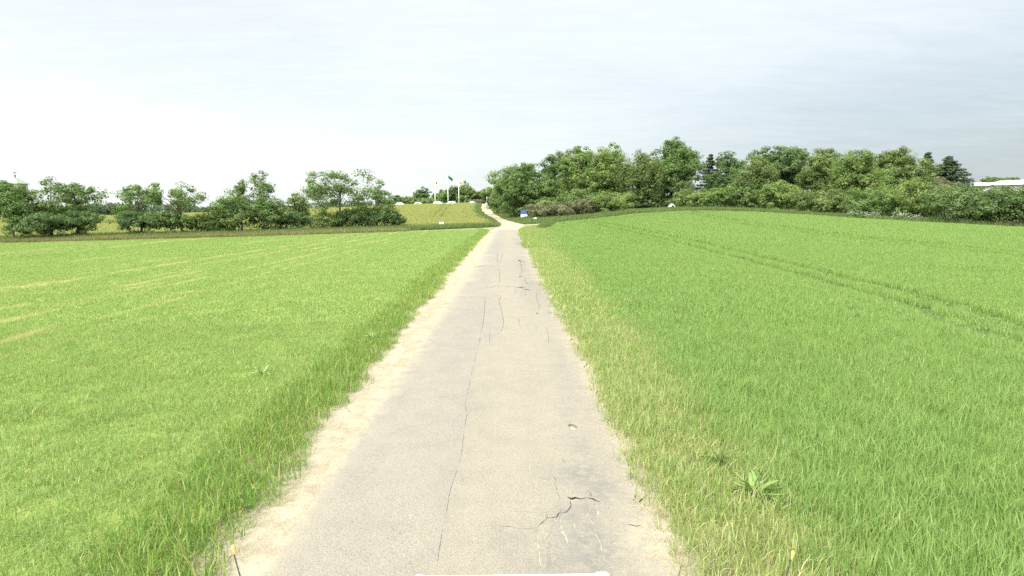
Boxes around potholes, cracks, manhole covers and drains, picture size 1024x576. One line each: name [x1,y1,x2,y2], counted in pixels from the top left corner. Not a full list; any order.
crack [498,473,640,569]
crack [479,239,541,344]
